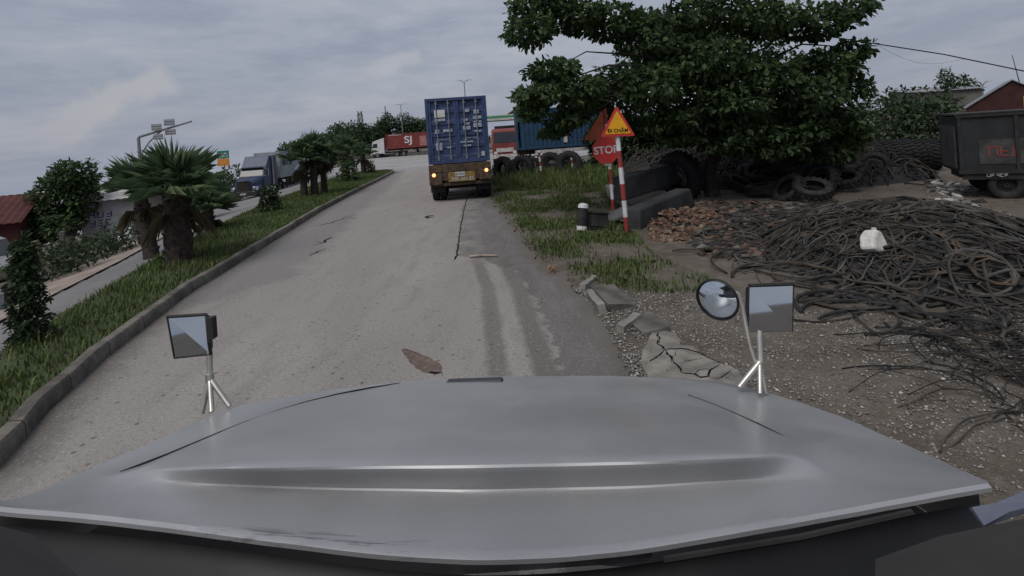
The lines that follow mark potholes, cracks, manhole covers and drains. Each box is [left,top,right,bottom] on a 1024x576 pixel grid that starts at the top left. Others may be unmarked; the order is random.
crack [454,194,474,260]
crack [309,214,357,256]
crack [646,333,731,379]
